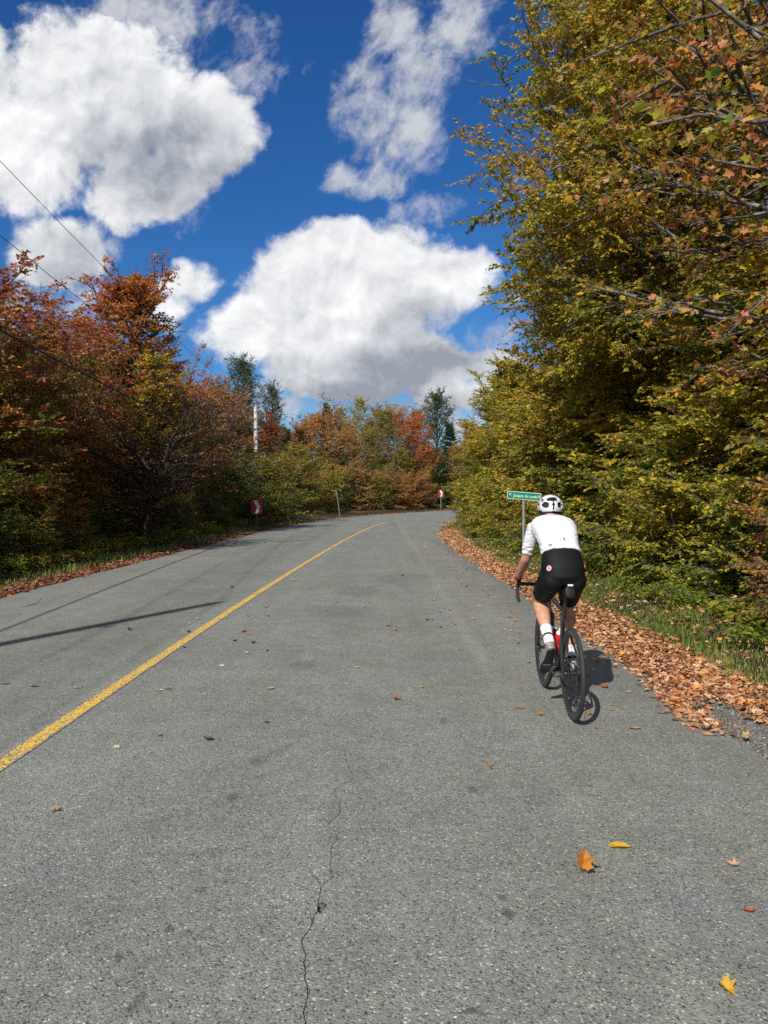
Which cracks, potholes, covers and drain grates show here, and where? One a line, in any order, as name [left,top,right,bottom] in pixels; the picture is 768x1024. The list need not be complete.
crack [301,746,353,1024]
